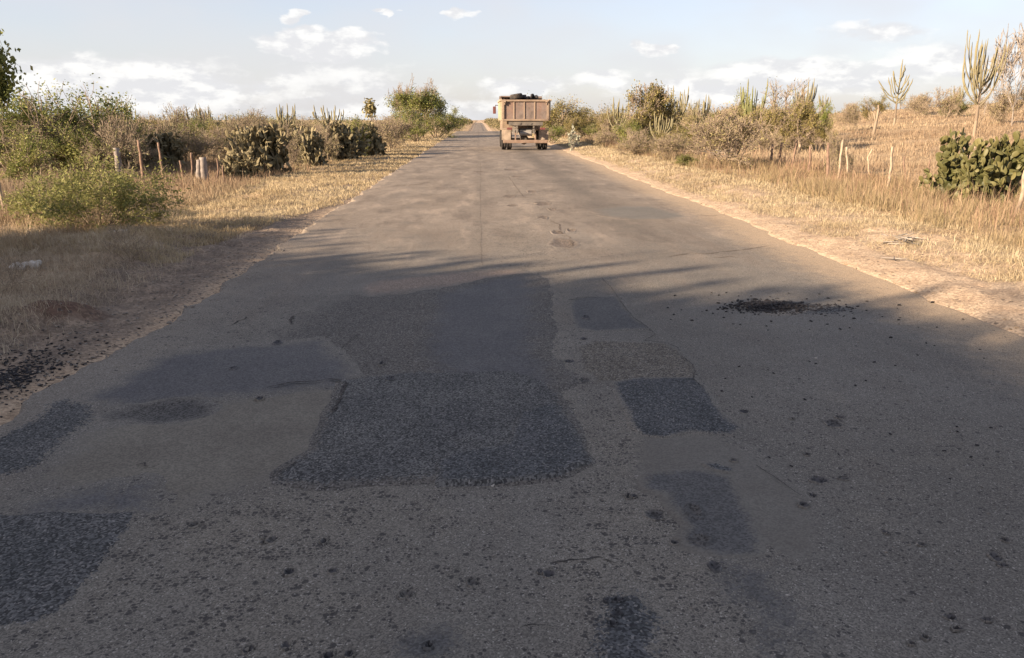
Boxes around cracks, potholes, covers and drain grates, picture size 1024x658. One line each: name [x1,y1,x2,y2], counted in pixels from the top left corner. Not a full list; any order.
pothole [547,237,581,249]
